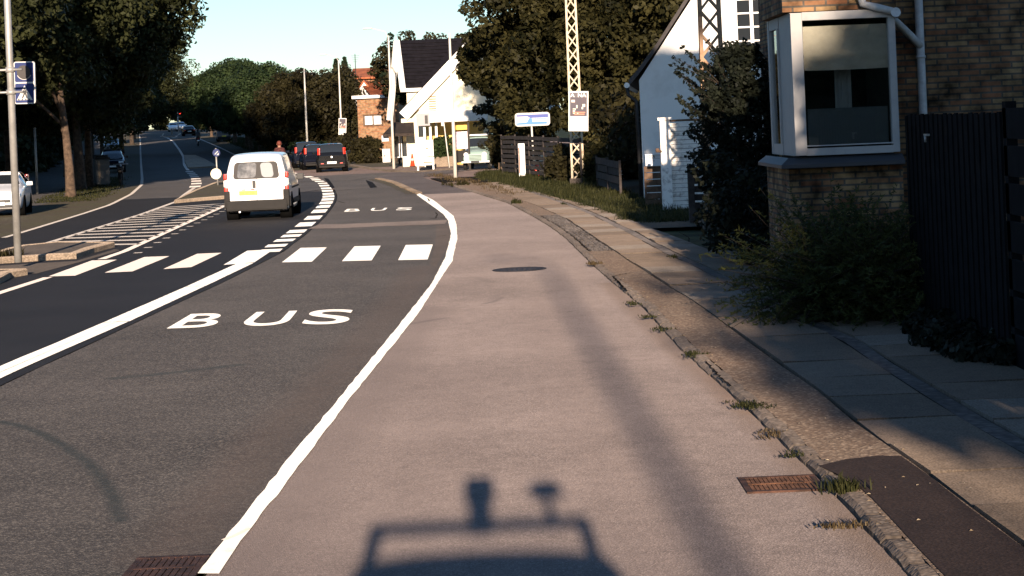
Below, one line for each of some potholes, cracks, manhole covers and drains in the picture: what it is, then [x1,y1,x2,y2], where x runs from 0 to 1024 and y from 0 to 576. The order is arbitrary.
drain grate [122,554,210,576]
drain grate [738,474,826,494]
